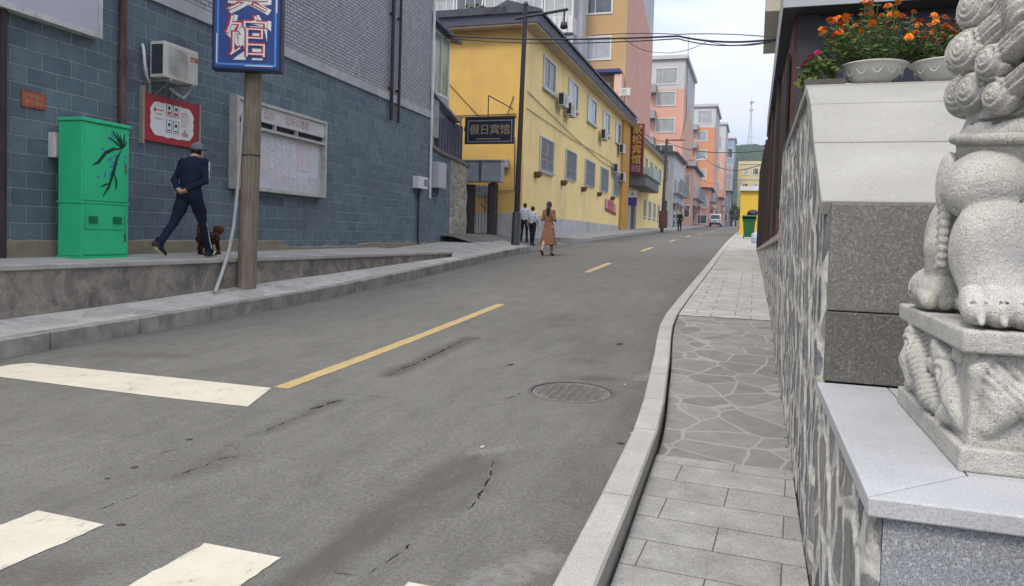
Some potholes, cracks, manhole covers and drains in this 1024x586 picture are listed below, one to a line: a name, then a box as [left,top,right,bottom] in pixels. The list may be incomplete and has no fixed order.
crack [333,544,411,575]
manhole cover [527,381,616,403]
crack [468,460,494,509]
crack [267,394,399,431]
